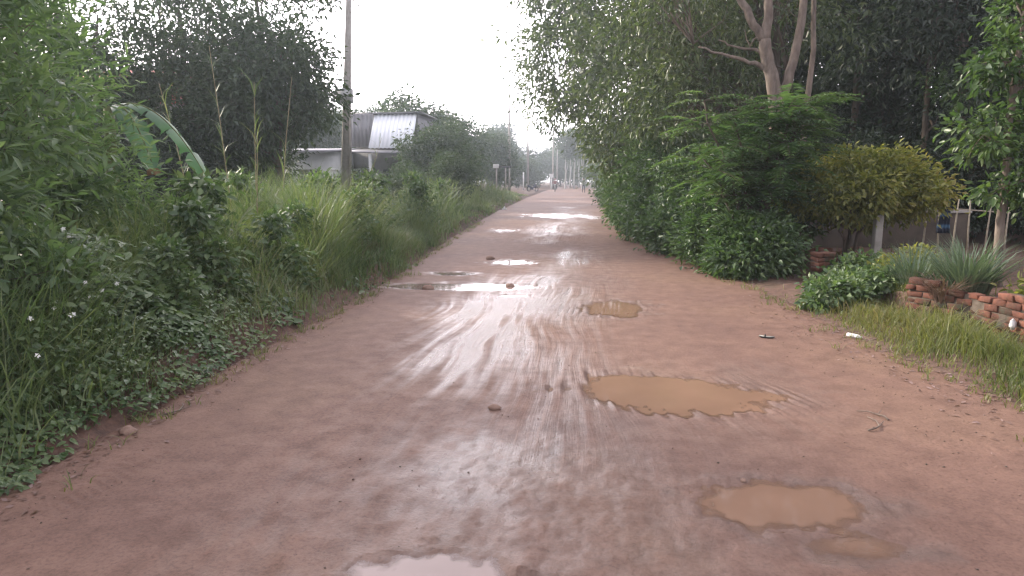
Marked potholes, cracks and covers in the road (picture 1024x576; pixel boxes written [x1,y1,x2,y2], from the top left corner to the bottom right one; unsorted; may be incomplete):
pothole [330,544,530,576]
pothole [378,281,558,292]
pothole [751,526,955,569]
pothole [538,368,811,425]
pothole [568,299,663,320]
pothole [648,469,903,539]
